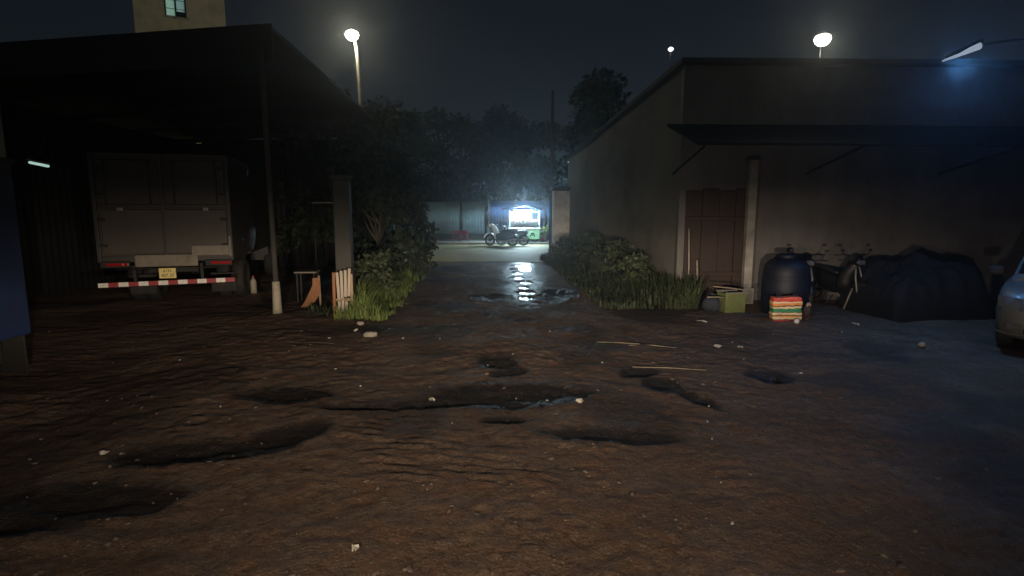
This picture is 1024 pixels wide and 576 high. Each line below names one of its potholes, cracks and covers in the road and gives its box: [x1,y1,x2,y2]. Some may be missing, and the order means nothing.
pothole [478,354,529,378]
pothole [108,421,334,467]
pothole [535,288,580,303]
pothole [619,368,722,411]
pothole [233,386,334,405]
pothole [745,369,796,384]
pothole [469,293,513,302]
pothole [535,427,680,446]
pothole [480,416,528,424]
pothole [315,383,594,412]
pothole [0,479,190,539]
